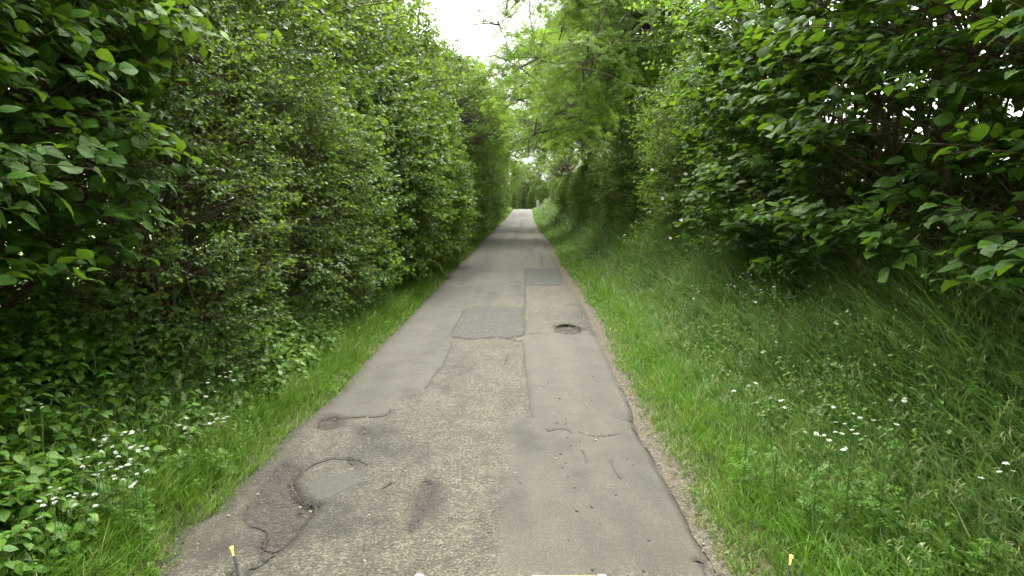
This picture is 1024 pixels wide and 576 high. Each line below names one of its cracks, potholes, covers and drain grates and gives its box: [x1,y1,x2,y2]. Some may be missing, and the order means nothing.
pothole [243,465,319,554]
pothole [317,417,341,430]
pothole [408,485,432,532]
pothole [554,324,583,334]
